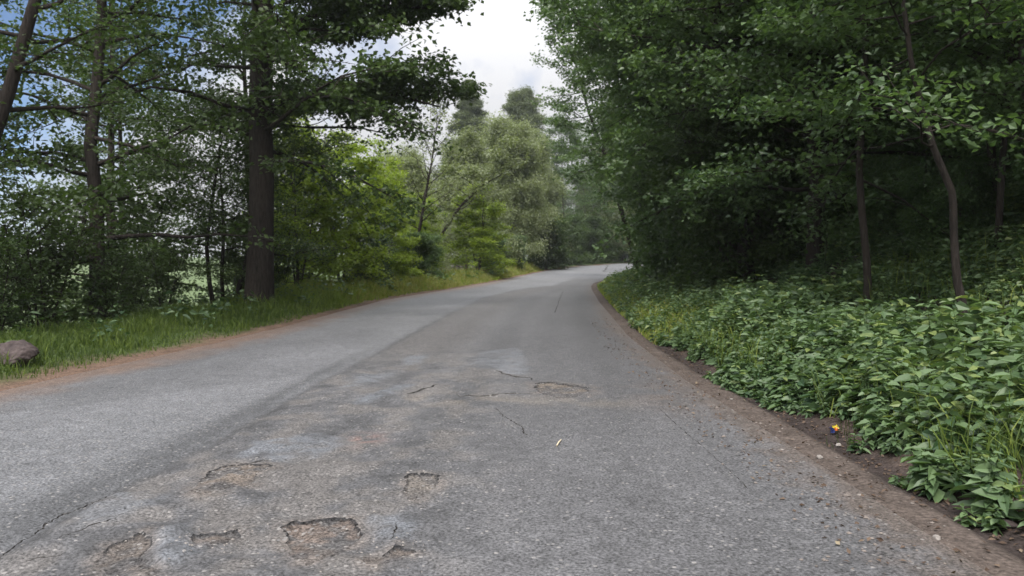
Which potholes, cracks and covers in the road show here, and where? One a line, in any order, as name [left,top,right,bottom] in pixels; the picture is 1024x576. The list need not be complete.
crack [659,408,748,489]
crack [1,494,121,563]
pothole [94,531,163,576]
pothole [280,517,365,566]
pothole [190,529,241,548]
pothole [360,544,416,565]
crack [403,371,588,435]
pothole [187,463,273,495]
pothole [534,382,592,398]
pothole [401,472,441,501]
